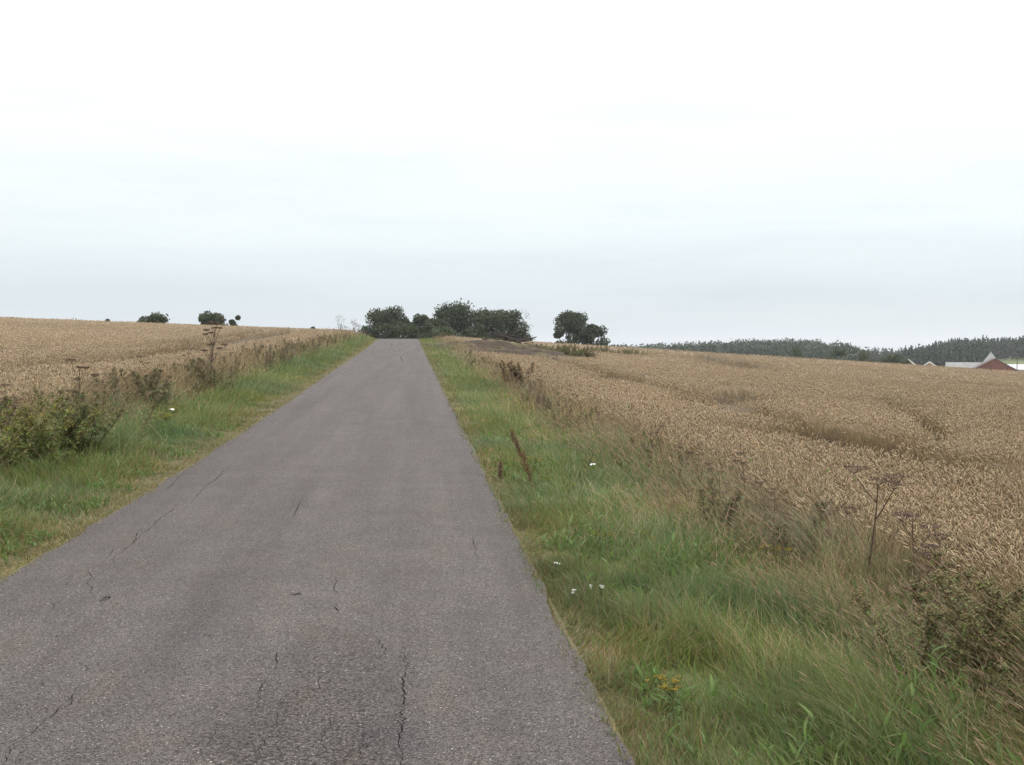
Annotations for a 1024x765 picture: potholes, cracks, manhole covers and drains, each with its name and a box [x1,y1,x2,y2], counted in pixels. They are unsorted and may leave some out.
crack [205,679,365,765]
crack [376,638,408,765]
crack [87,507,175,593]
crack [2,665,89,765]
